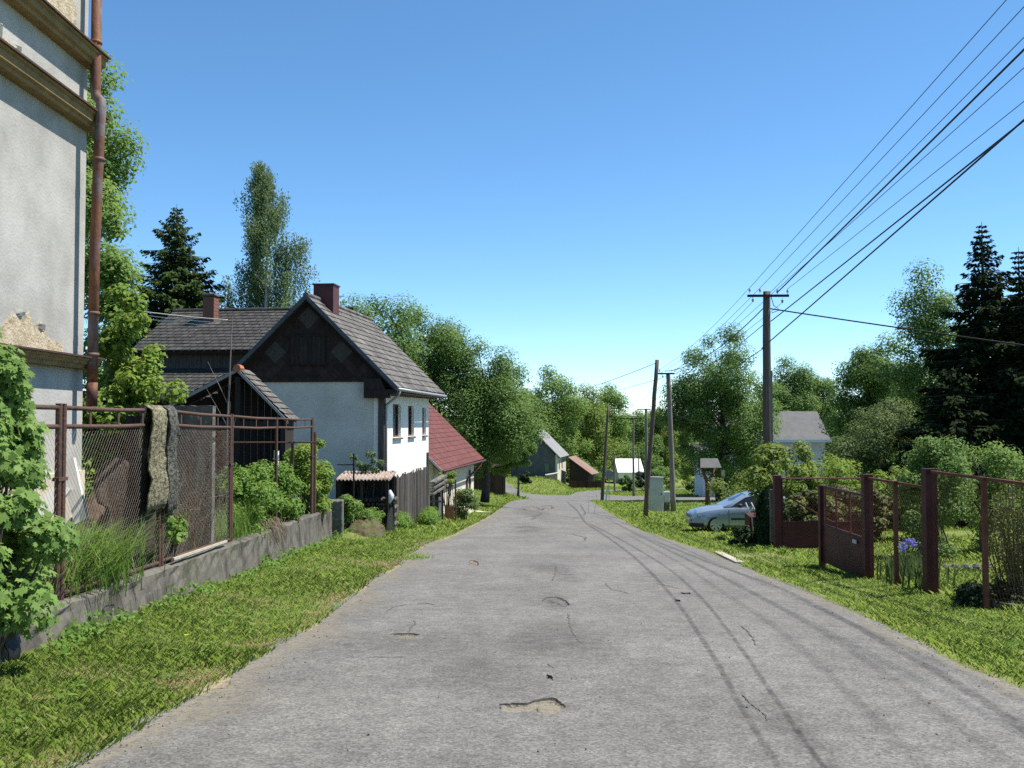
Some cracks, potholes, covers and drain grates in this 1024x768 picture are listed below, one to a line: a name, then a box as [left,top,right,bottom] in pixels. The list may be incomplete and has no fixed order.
pothole [542,597,570,608]
pothole [499,697,566,715]
